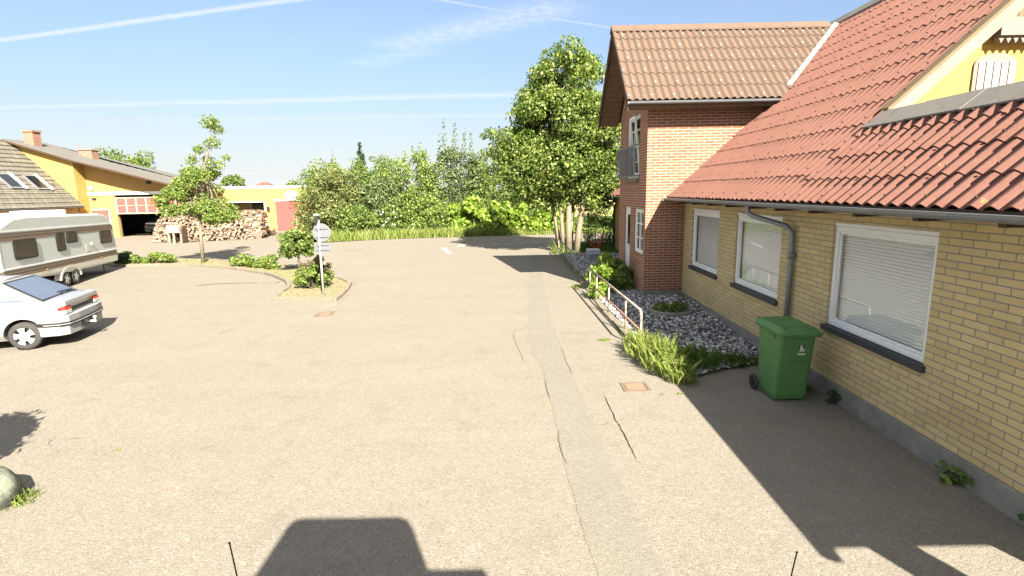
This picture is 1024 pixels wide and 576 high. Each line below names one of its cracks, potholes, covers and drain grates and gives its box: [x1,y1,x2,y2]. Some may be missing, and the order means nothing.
manhole cover [620,382,652,392]
